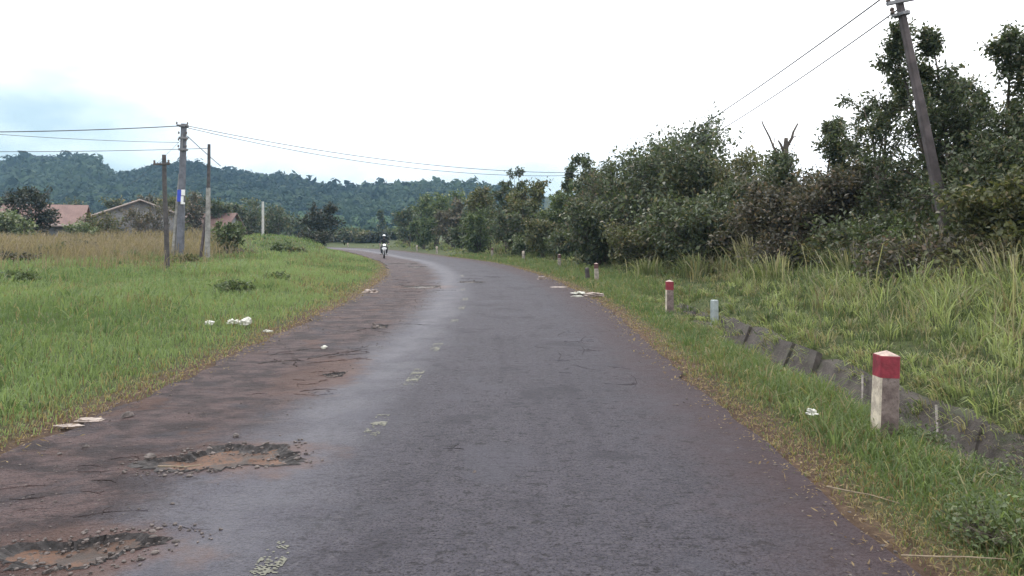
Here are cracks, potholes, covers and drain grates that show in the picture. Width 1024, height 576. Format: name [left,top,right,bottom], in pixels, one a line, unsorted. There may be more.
crack [249,324,427,395]
pothole [117,439,323,477]
crack [534,331,642,385]
pothole [0,522,223,576]
